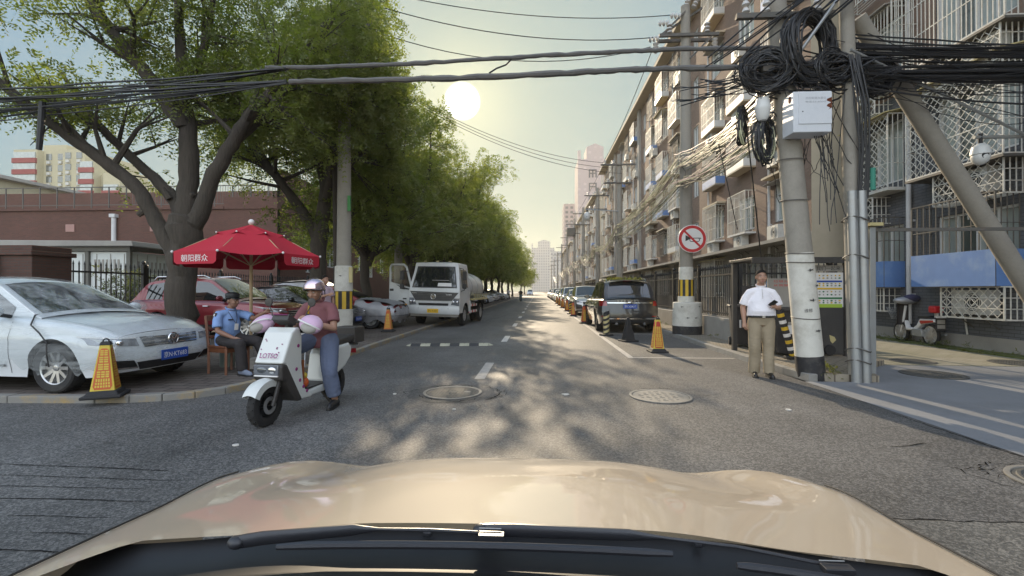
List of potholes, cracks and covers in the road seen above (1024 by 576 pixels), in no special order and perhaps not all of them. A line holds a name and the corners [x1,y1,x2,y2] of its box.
manhole cover [1003,465,1024,484]
crack [892,413,1023,487]
manhole cover [629,389,693,404]
manhole cover [423,386,482,399]
manhole cover [898,369,970,380]
